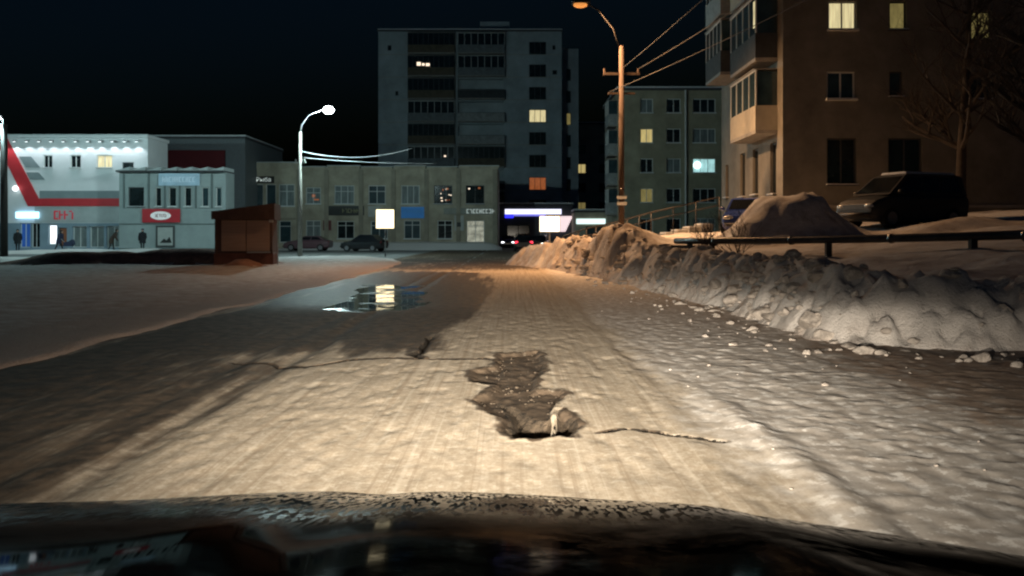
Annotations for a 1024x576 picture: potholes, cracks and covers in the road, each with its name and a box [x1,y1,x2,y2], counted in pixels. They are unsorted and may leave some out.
pothole [469,351,579,439]
crack [608,428,726,443]
crack [232,337,490,369]
